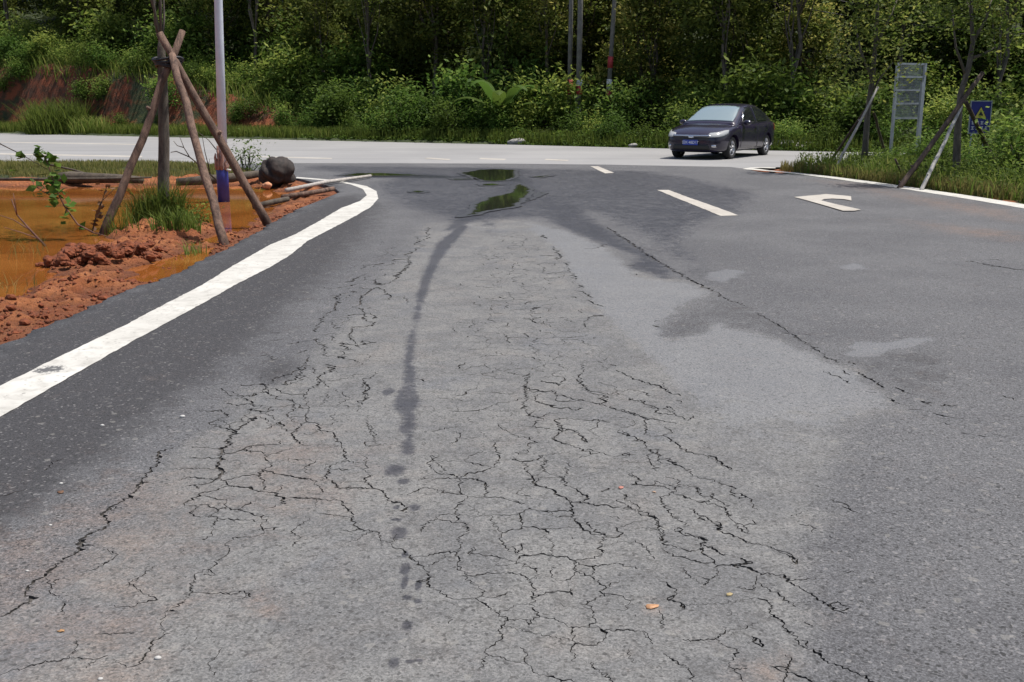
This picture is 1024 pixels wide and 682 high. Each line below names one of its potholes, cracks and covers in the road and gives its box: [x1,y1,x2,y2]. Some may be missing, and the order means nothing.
crack [672,455,874,682]
crack [0,447,340,675]
crack [481,234,795,682]
crack [176,242,518,667]
crack [782,475,900,538]
